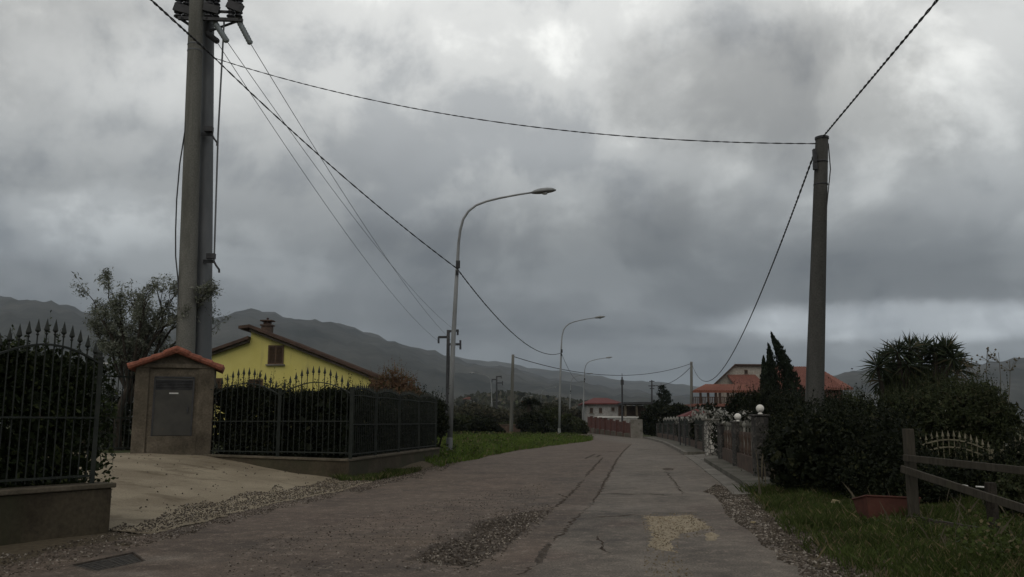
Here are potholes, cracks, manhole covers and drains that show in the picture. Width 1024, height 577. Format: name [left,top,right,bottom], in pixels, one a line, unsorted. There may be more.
crack [517,445,684,576]
